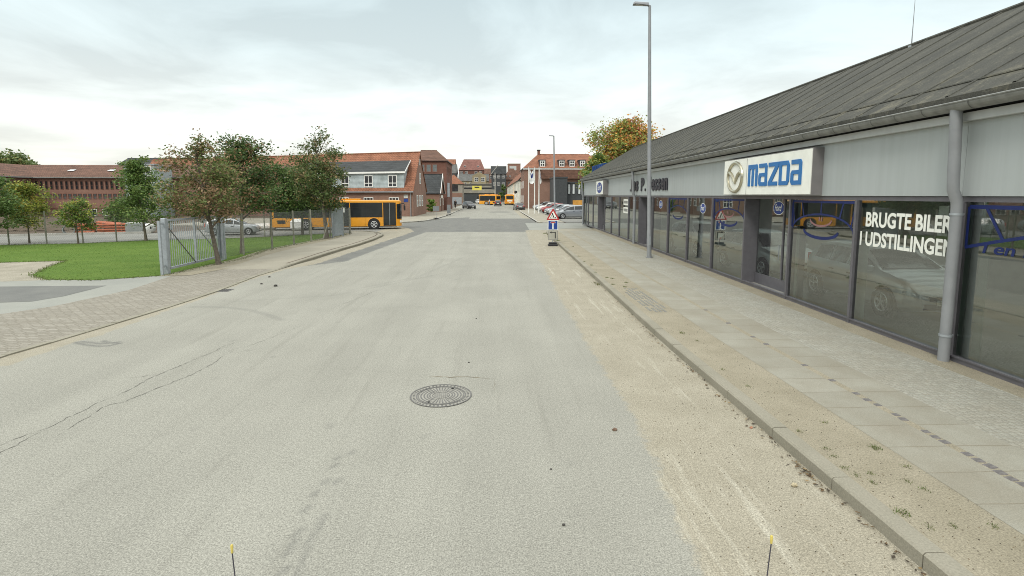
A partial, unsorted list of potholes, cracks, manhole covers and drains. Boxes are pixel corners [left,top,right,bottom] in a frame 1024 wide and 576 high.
crack [1,325,303,452]
manhole cover [410,384,472,407]
